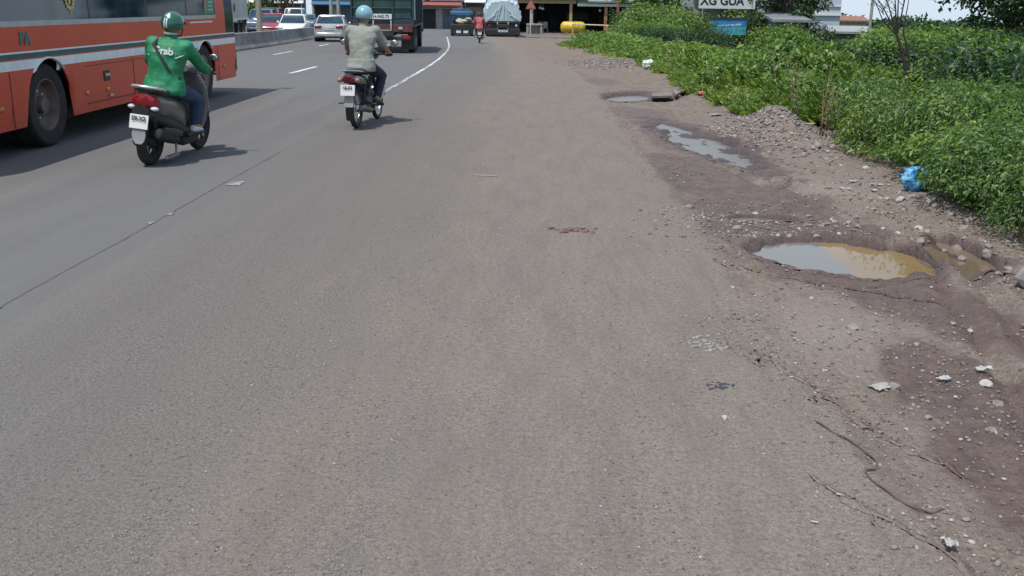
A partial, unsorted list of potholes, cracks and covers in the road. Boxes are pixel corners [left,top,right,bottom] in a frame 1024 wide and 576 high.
pothole [915,231,1008,281]
pothole [726,229,961,285]
pothole [597,90,662,103]
crack [724,340,992,576]
pothole [634,116,810,187]
